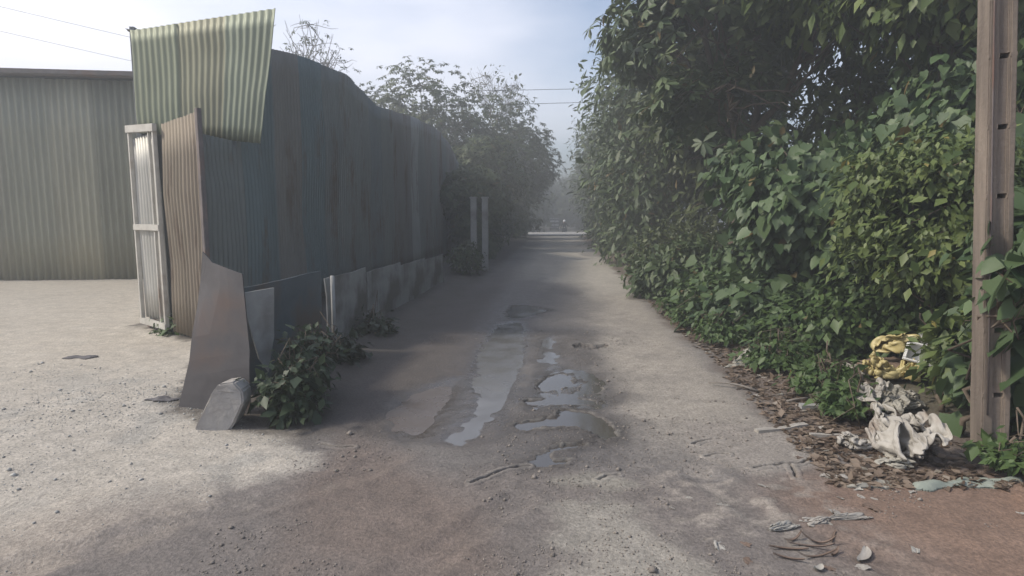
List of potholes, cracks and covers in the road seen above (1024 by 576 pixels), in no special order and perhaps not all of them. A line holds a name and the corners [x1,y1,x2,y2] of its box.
pothole [566,341,613,351]
pothole [505,407,625,445]
pothole [516,396,604,407]
pothole [523,438,596,471]
crack [464,463,536,487]
pothole [530,372,581,394]
pothole [501,304,554,320]
